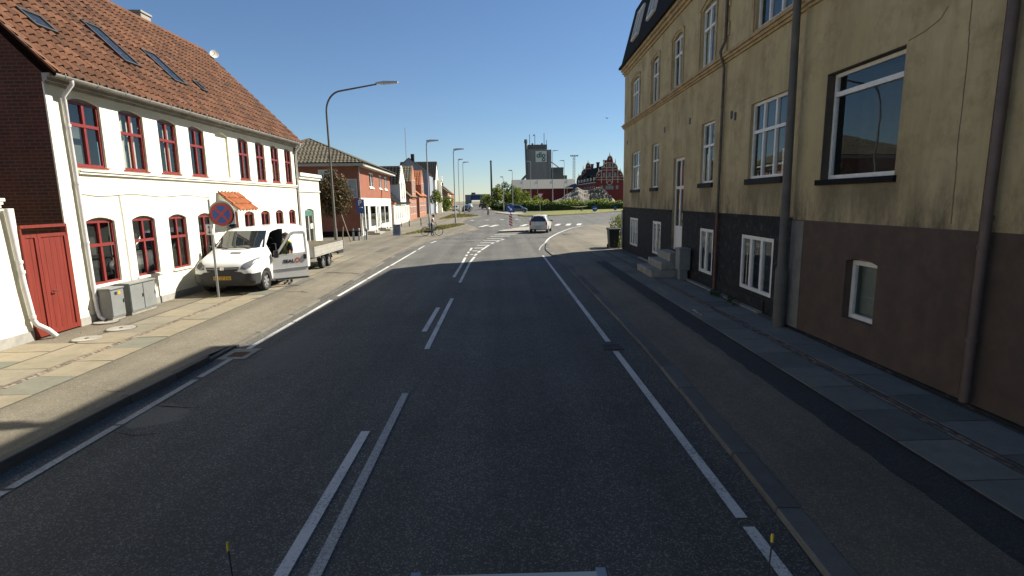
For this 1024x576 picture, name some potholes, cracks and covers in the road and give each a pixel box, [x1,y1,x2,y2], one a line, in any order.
manhole cover [69,335,102,343]
drain grate [215,348,262,360]
